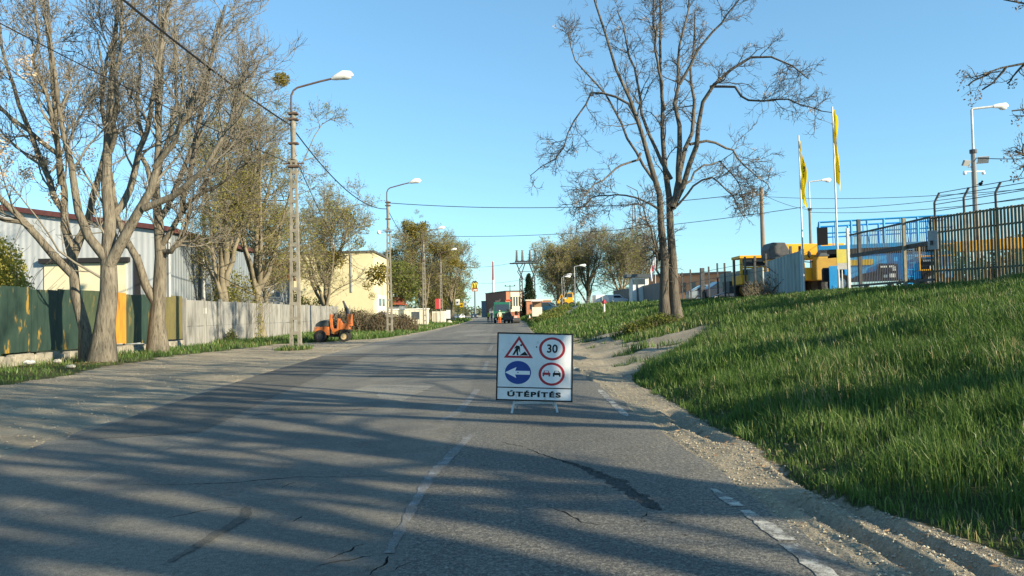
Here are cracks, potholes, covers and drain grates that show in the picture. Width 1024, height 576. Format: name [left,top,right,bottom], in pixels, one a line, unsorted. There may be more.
crack [169,476,361,488]
crack [315,544,411,575]
